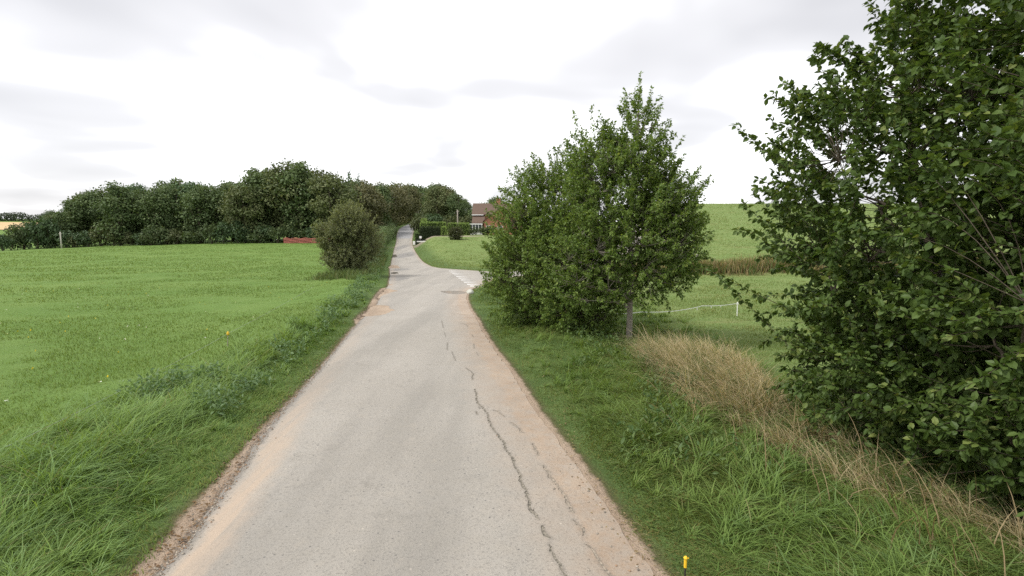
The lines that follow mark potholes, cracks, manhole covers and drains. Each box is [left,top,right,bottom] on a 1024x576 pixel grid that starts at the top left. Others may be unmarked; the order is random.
crack [442,323,611,576]
